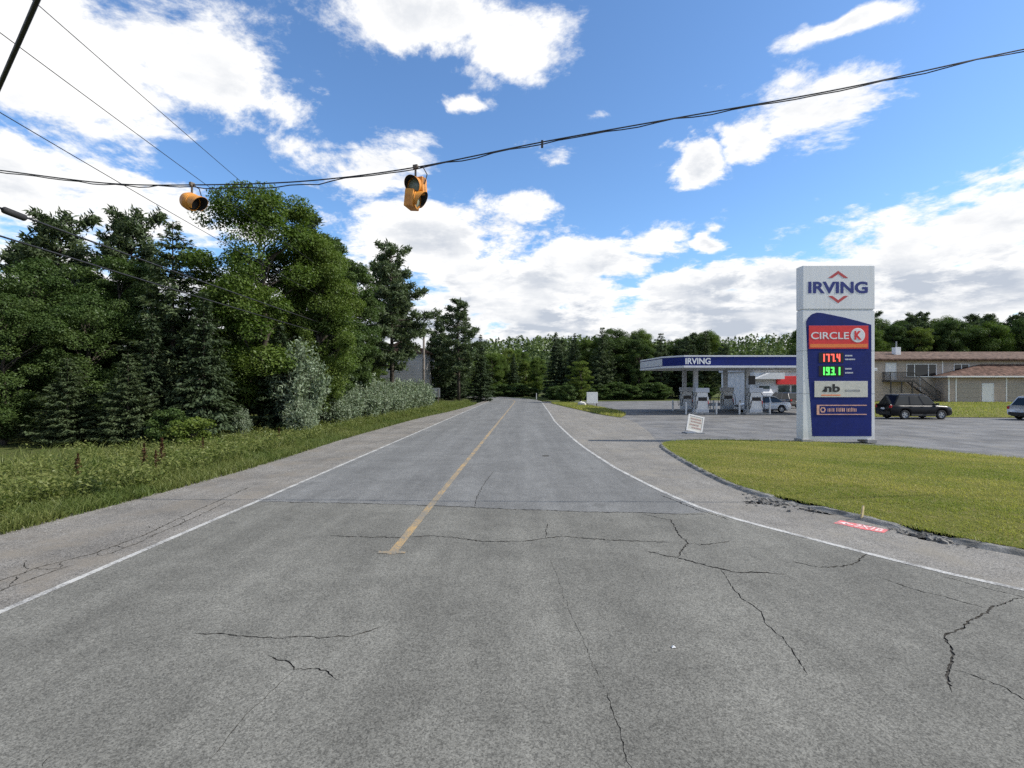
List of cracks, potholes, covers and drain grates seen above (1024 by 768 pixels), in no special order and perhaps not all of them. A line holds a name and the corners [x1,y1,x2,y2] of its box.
crack [888,577,1024,700]
crack [194,626,382,763]
crack [558,582,632,768]
crack [269,471,866,675]
crack [0,488,247,591]
